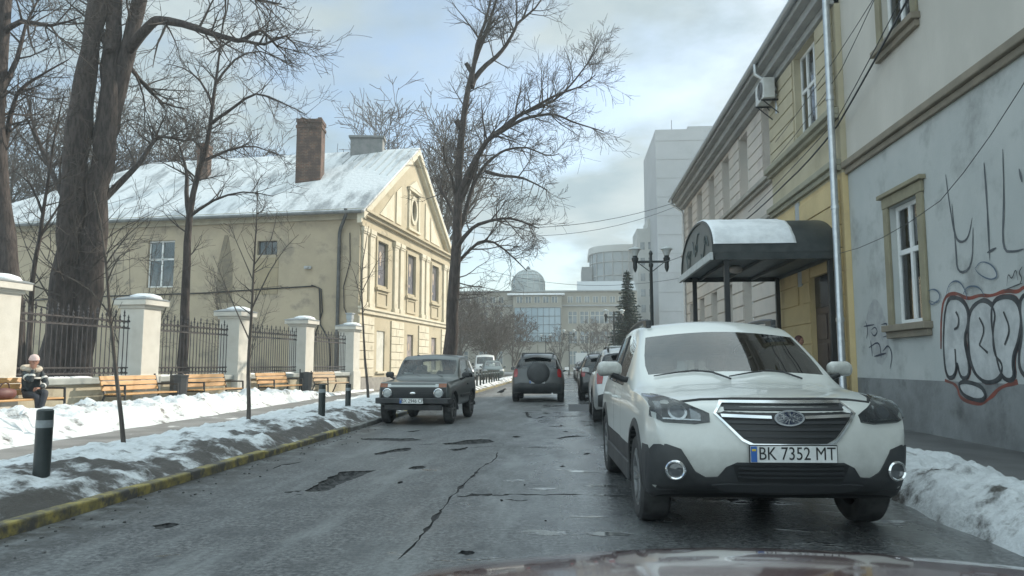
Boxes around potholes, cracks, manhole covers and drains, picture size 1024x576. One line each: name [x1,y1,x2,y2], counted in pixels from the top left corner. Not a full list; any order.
crack [400,446,583,558]
pothole [305,470,375,492]
